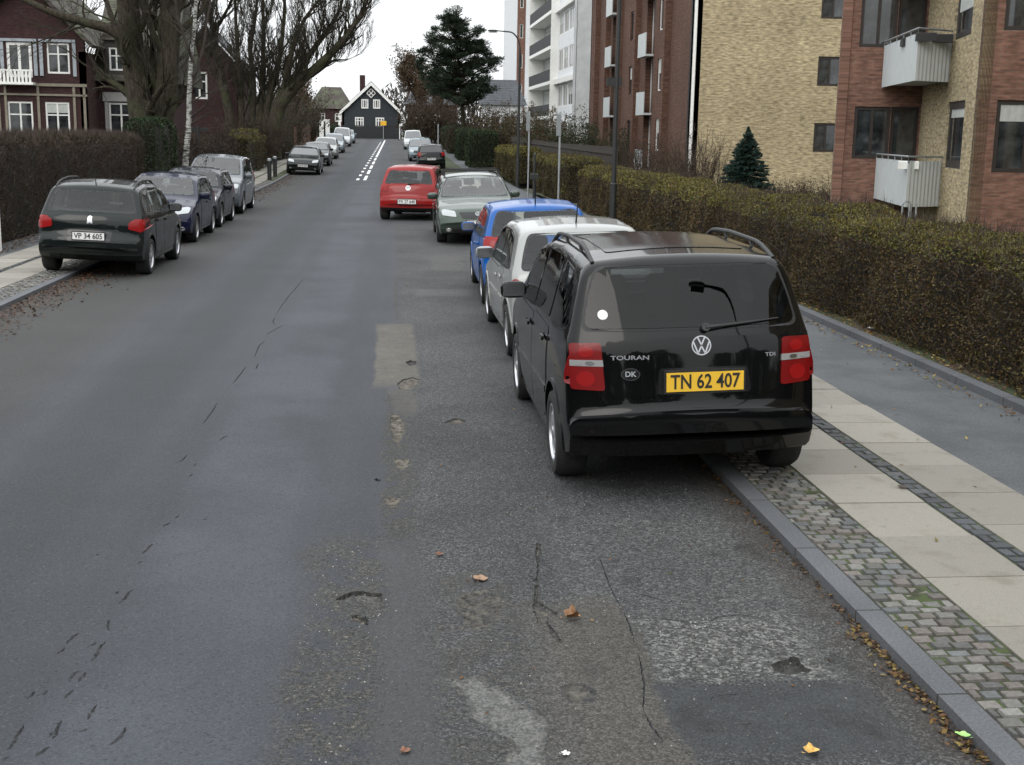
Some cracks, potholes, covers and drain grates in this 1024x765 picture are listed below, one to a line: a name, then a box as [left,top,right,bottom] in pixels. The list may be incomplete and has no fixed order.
pothole [336,591,383,607]
pothole [560,683,599,704]
crack [1,280,303,761]
crack [599,556,755,741]
pothole [397,377,420,390]
pothole [771,656,811,675]
